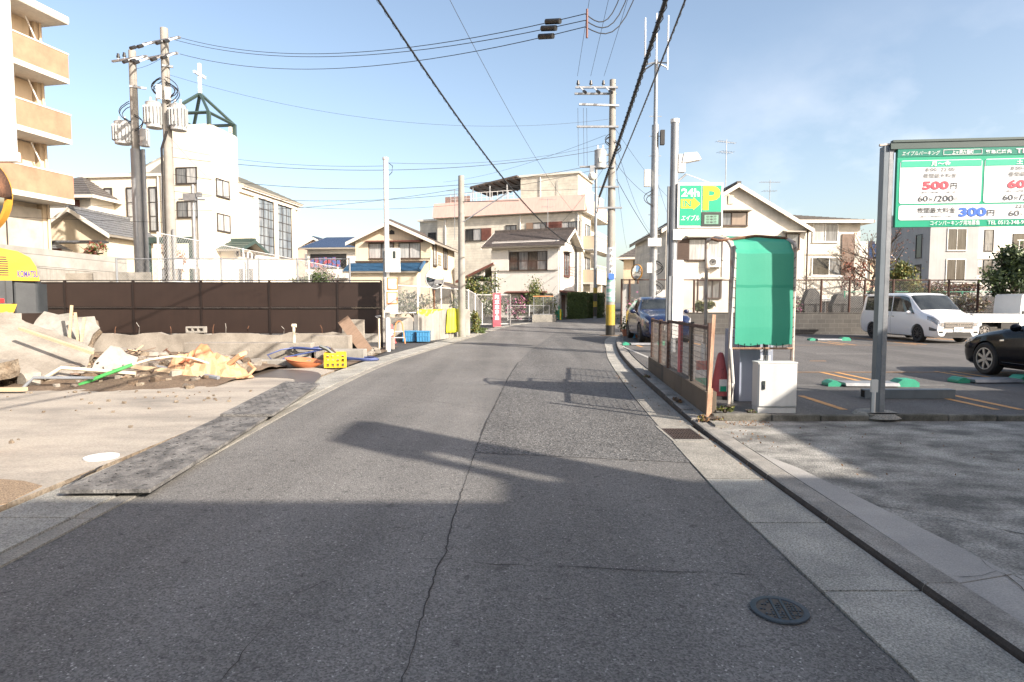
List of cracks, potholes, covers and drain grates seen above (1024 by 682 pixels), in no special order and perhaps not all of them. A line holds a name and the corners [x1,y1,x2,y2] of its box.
crack [357,452,762,682]
manhole cover [750,596,810,625]
utility cover [83,452,120,461]
drain grate [661,428,705,439]
